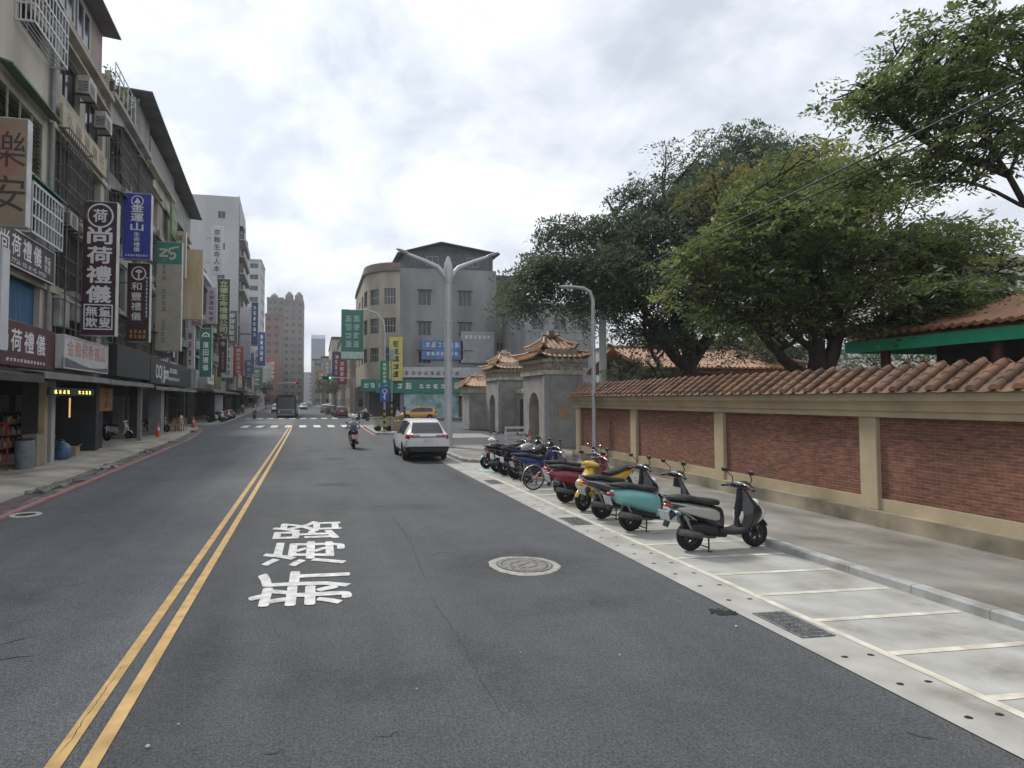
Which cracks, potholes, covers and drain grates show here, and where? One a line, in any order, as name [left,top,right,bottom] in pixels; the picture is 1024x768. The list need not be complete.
crack [388,508,507,719]
pothole [709,608,737,616]
drain grate [752,611,836,638]
manhole cover [488,556,561,576]
